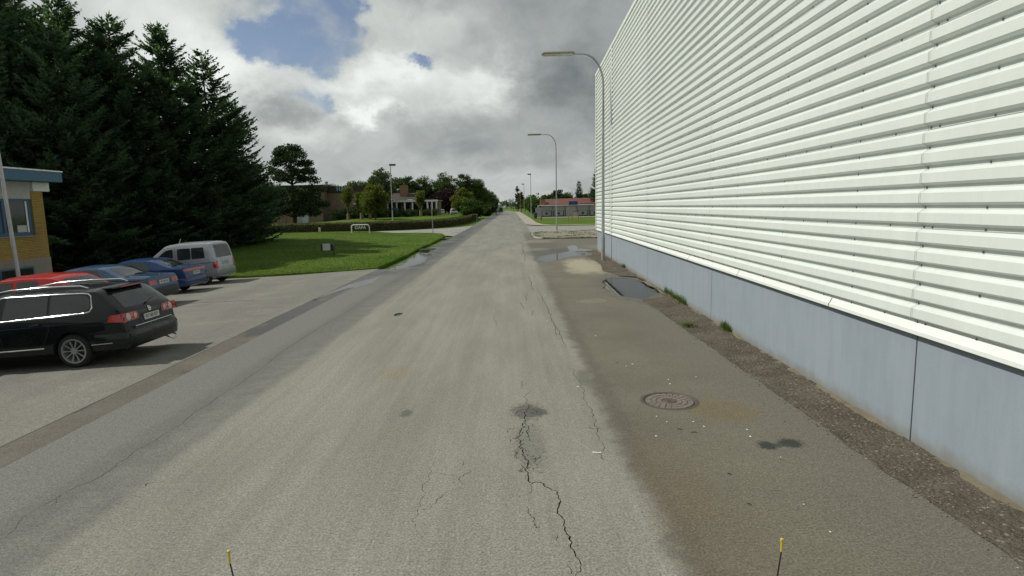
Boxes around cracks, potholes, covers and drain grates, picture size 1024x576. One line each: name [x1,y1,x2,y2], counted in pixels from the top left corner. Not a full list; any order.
manhole cover [640,392,700,410]
crack [505,381,582,576]
pothole [602,278,660,299]
crack [414,454,471,526]
